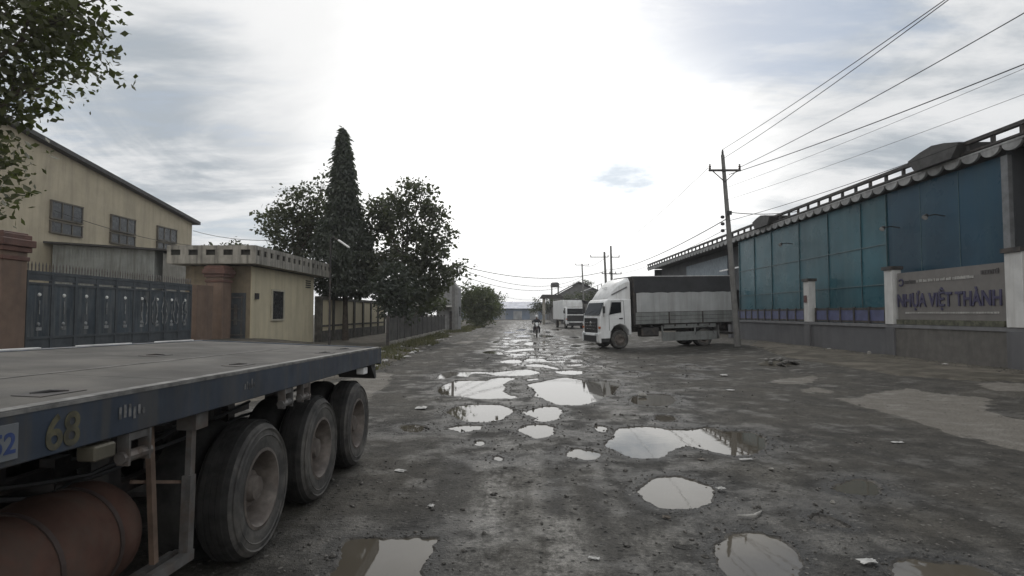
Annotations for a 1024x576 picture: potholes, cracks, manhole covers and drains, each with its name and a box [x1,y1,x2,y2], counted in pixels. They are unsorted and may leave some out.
pothole [517,406,564,422]
pothole [628,394,677,406]
pothole [445,424,484,432]
pothole [527,377,622,405]
pothole [712,531,806,576]
pothole [603,426,767,459]
pothole [636,475,716,509]
pothole [517,423,556,439]
pothole [436,369,541,379]
pothole [565,447,602,460]
pothole [888,556,1001,576]
pothole [437,377,519,399]
